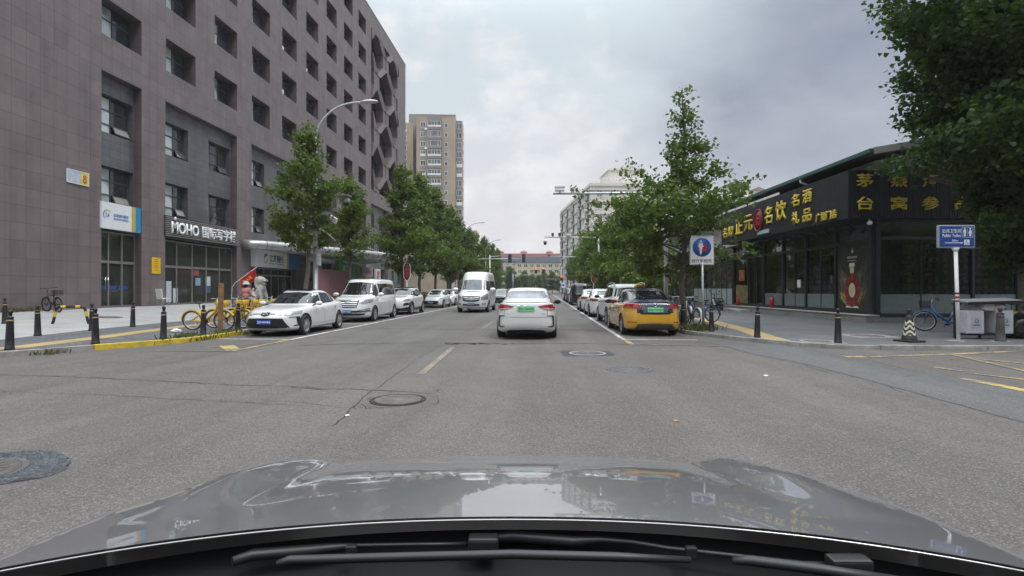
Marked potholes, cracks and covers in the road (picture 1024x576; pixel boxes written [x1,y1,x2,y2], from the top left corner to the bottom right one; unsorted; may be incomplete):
manhole cover [369,394,426,406]
manhole cover [605,365,653,373]
manhole cover [0,457,31,475]
crack [0,354,439,425]
